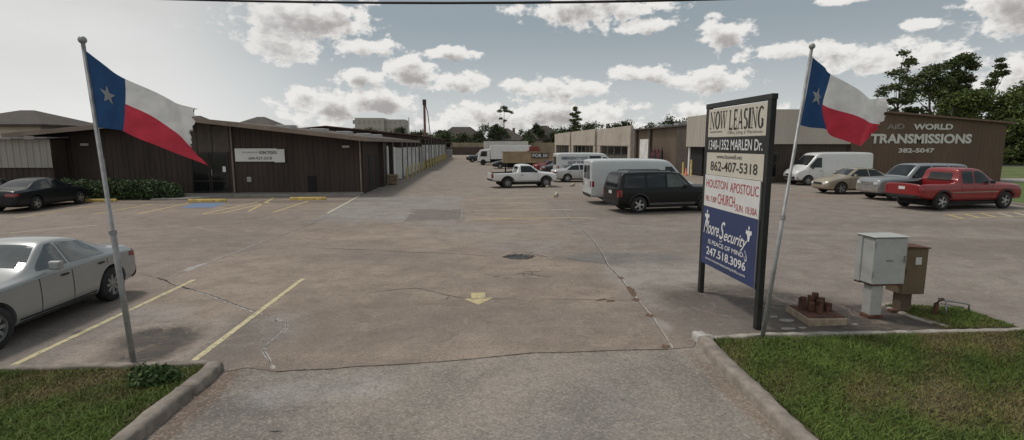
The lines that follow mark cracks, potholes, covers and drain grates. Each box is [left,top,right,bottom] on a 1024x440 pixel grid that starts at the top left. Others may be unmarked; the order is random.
crack [148,275,288,369]
crack [370,288,510,300]
